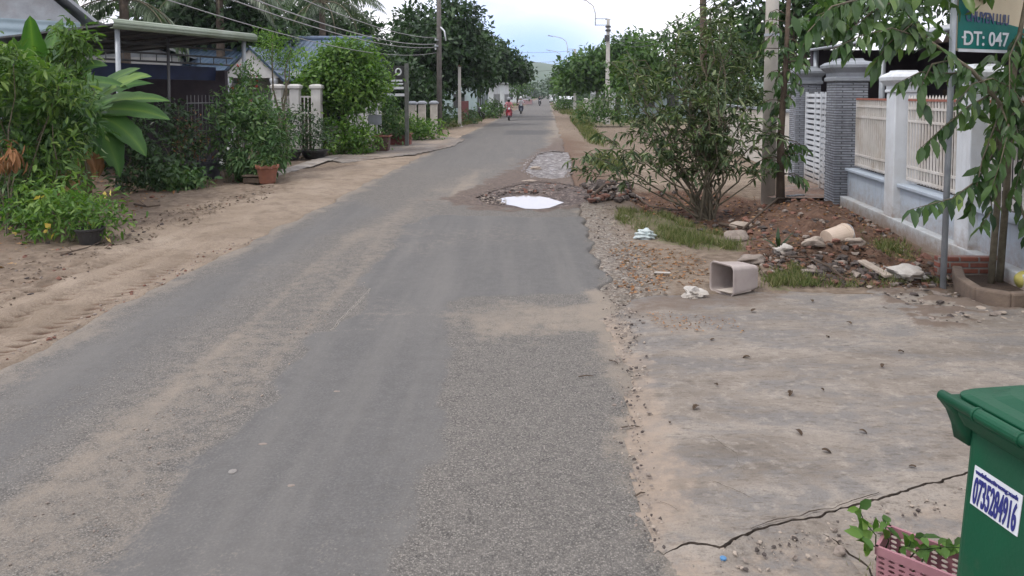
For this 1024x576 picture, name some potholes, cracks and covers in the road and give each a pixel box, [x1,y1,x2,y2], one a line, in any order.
crack [658,435,968,576]
pothole [463,180,589,212]
